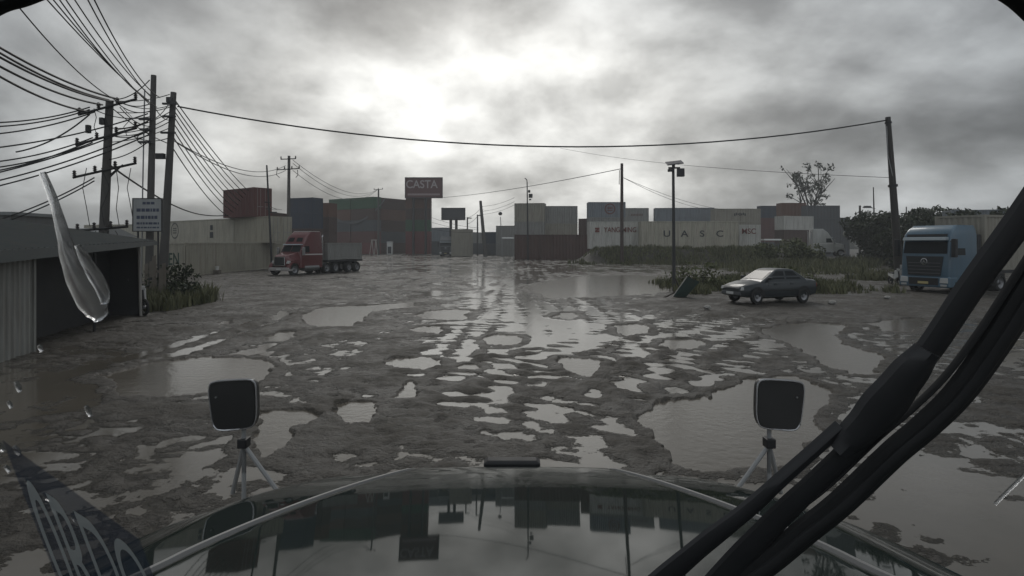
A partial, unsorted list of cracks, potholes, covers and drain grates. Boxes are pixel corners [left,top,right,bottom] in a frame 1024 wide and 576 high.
pothole [551,355,609,379]
pothole [376,354,448,371]
pothole [292,301,424,327]
pothole [326,397,385,427]
